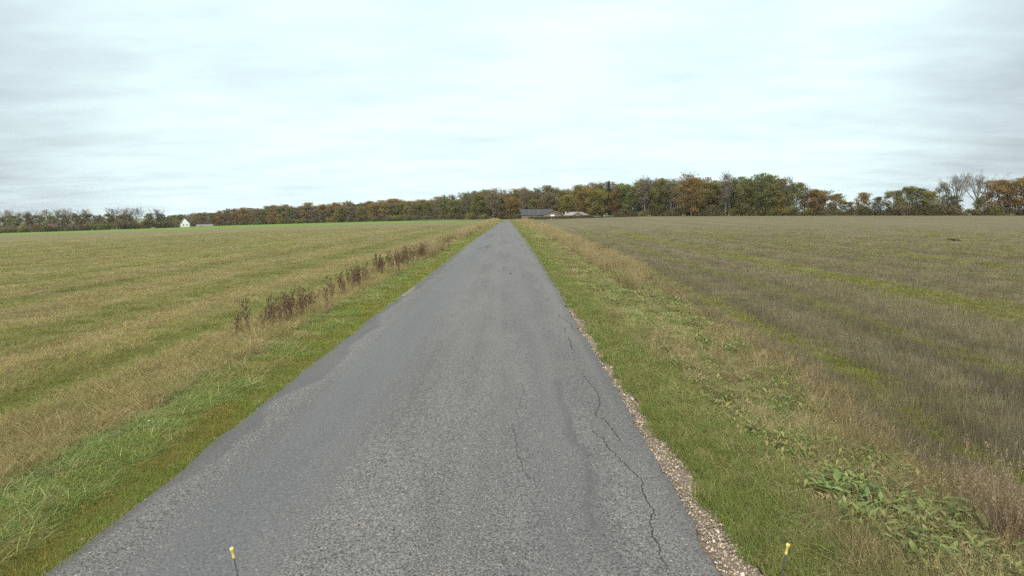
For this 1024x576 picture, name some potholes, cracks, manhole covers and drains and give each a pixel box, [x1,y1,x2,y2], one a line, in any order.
crack [583,375,668,569]
